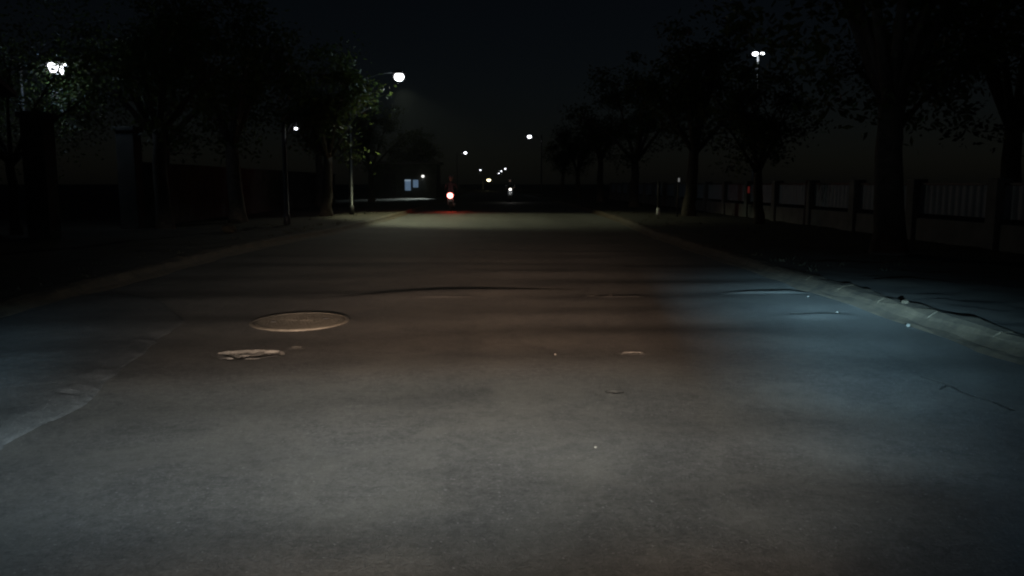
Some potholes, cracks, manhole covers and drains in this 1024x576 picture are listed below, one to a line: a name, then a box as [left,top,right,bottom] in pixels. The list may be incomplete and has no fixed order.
pothole [210,345,311,361]
manhole cover [249,312,349,331]
crack [908,374,1024,415]
